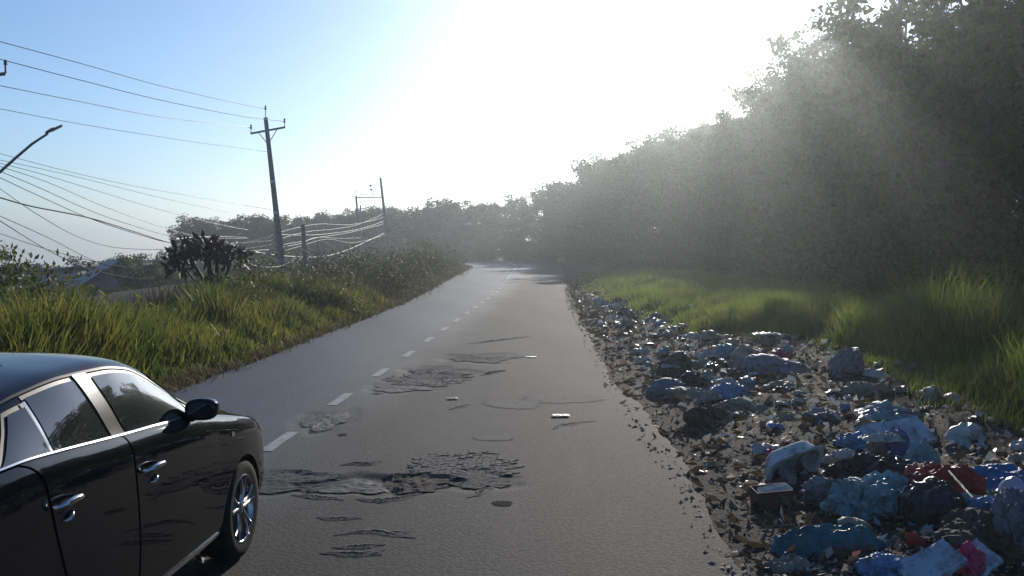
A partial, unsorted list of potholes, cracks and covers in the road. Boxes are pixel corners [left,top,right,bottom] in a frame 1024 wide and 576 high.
pothole [449,354,513,363]
pothole [457,471,512,489]
pothole [408,368,474,379]
pothole [383,477,451,494]
crack [552,420,596,429]
crack [400,336,529,386]
